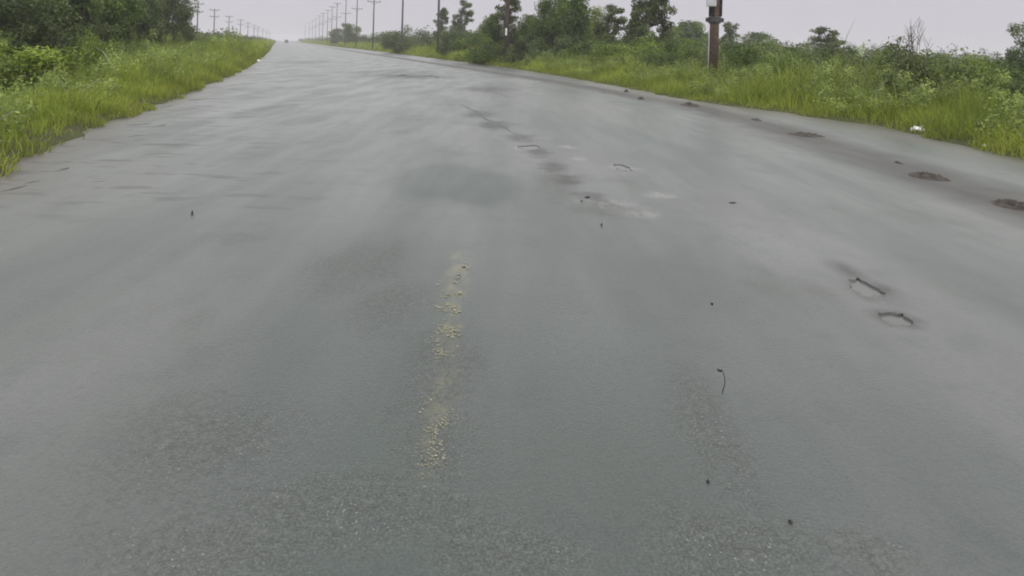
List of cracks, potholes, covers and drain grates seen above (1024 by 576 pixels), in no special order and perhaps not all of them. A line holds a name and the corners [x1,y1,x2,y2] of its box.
pothole [848,277,886,302]
pothole [878,312,913,327]
crack [461,89,515,134]
